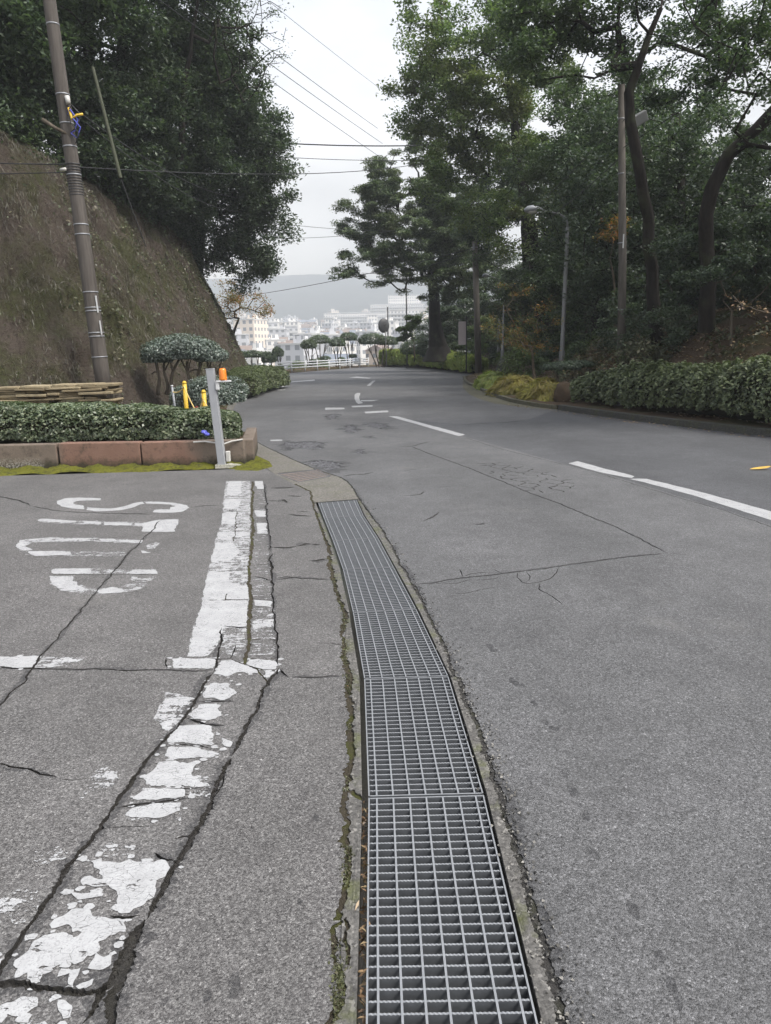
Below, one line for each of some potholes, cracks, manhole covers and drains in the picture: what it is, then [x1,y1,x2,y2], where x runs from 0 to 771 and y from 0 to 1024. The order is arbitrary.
drain grate [366,795,538,1024]
drain grate [324,516,378,542]
drain grate [333,538,393,571]
crack [403,443,683,604]
drain grate [353,609,448,684]
drain grate [364,676,483,798]
drain grate [318,500,364,520]
drain grate [343,567,416,614]
